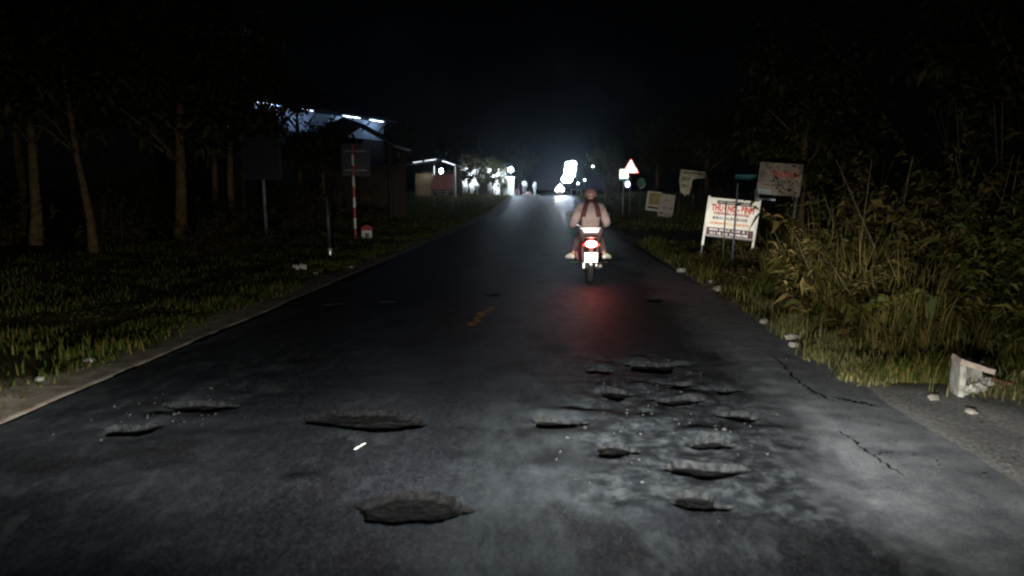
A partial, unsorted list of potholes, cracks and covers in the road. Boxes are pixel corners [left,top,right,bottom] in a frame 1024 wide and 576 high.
pothole [103,422,166,437]
crack [764,352,881,407]
pothole [622,361,685,375]
pothole [669,490,735,512]
pothole [352,490,476,526]
pothole [660,460,752,481]
pothole [684,434,738,451]
pothole [162,400,243,413]
pothole [713,410,762,423]
pothole [302,409,428,433]
pothole [584,366,614,375]
pothole [600,386,634,402]
